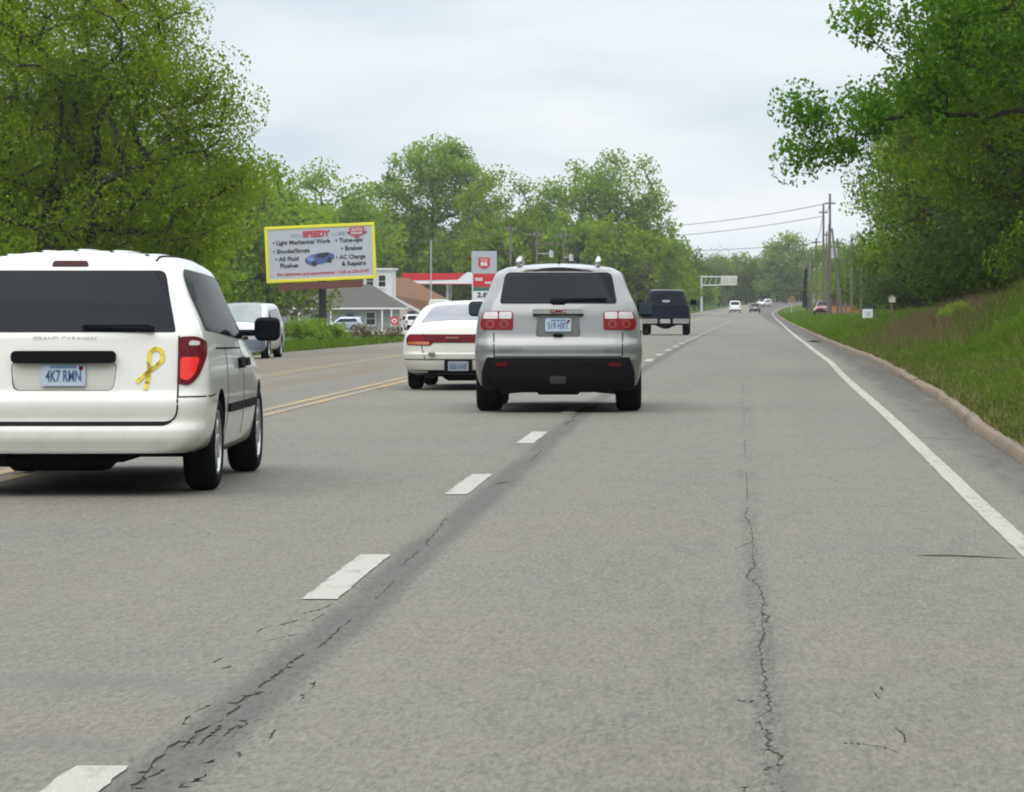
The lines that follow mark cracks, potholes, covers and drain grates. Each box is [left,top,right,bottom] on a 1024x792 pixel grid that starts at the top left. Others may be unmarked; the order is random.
crack [130,404,600,790]
crack [737,389,784,792]
crack [845,686,906,754]
